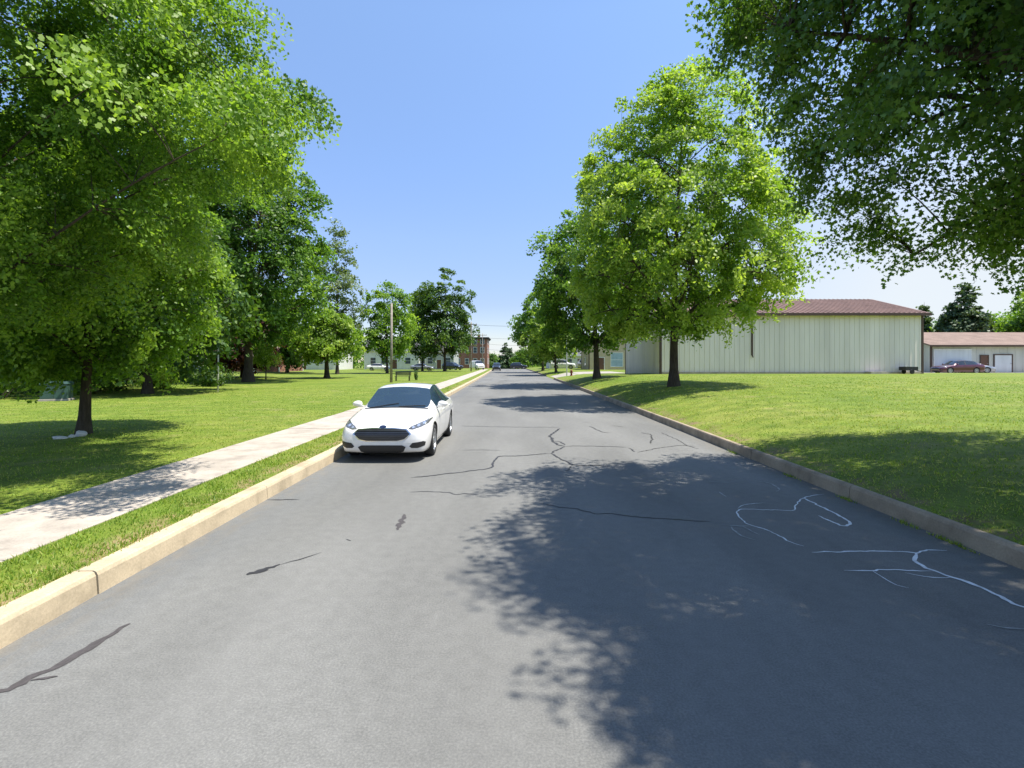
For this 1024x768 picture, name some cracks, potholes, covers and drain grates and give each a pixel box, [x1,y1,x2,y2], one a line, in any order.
crack [541,503,696,521]
crack [710,481,852,546]
crack [821,549,1024,607]
